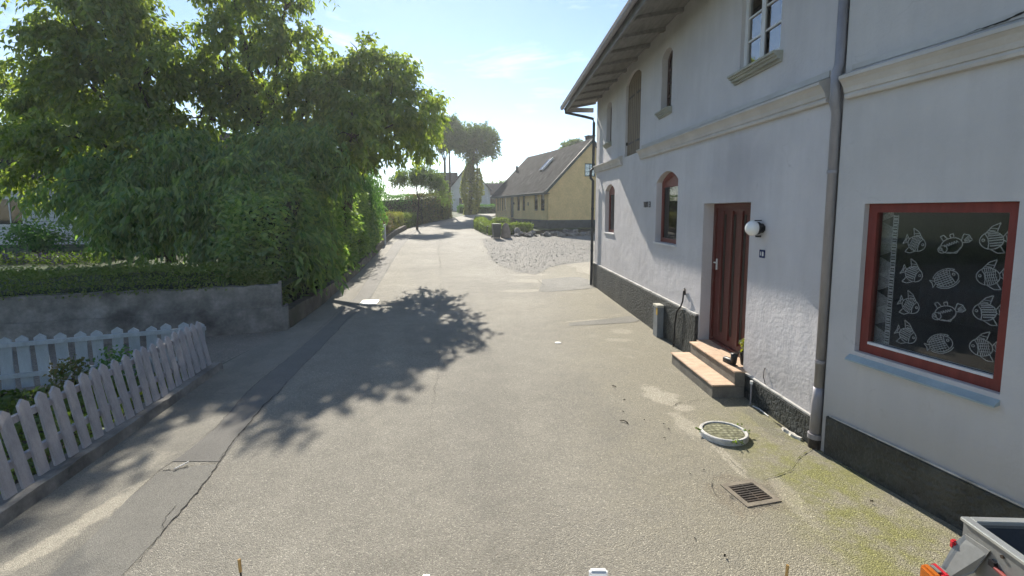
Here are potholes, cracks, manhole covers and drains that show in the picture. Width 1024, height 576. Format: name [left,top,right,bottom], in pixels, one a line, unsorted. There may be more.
manhole cover [695,421,750,446]
drain grate [720,479,782,508]
crack [764,420,812,479]
